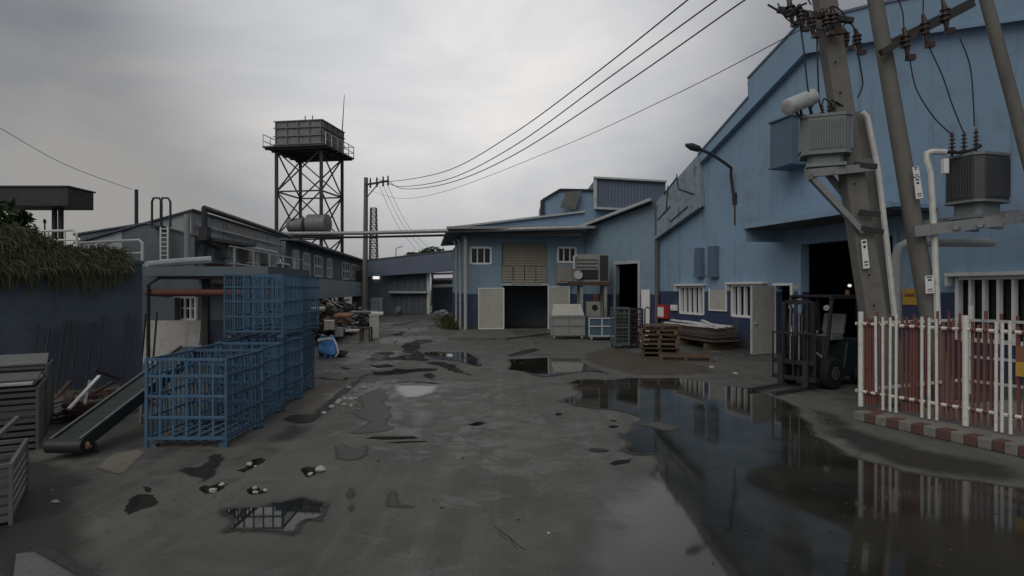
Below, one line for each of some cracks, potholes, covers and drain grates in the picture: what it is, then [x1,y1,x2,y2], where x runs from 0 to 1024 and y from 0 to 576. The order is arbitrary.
pothole [199,482,228,494]
pothole [301,466,317,478]
pothole [124,494,159,515]
pothole [236,457,266,473]
crack [493,525,525,551]
